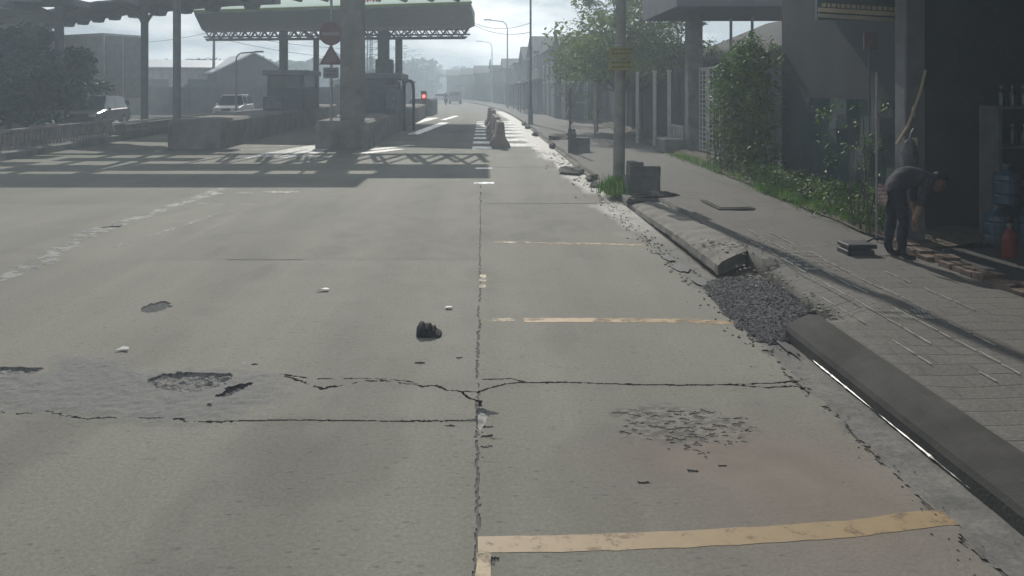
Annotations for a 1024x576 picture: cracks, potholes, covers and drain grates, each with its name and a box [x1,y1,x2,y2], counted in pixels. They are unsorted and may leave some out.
pothole [147,371,233,393]
pothole [141,301,173,313]
crack [1,181,1009,576]
pothole [0,366,44,377]
pothole [215,382,254,397]
